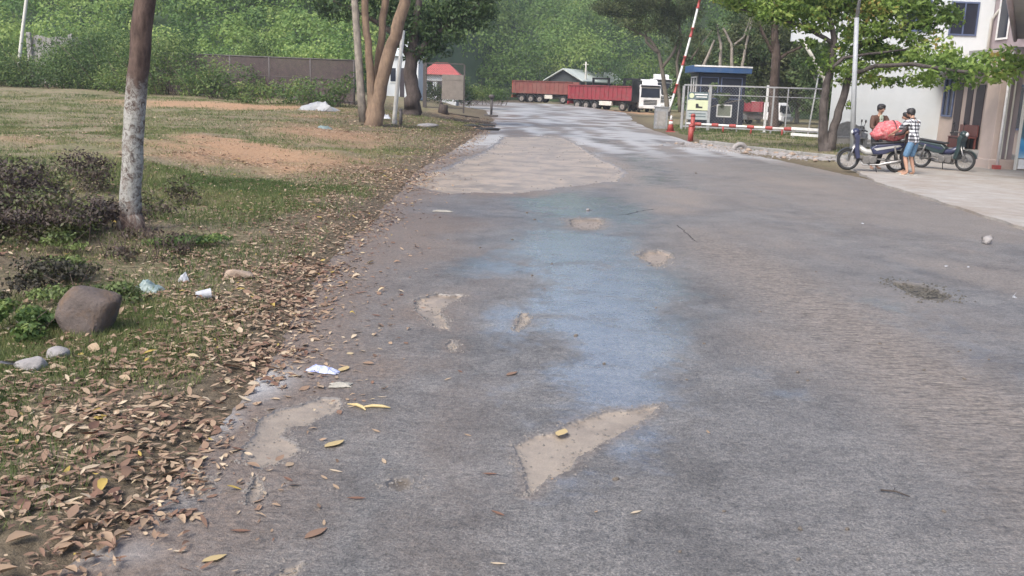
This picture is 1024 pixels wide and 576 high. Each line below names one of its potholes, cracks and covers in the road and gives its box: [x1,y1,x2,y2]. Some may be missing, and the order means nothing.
pothole [878,276,976,304]
